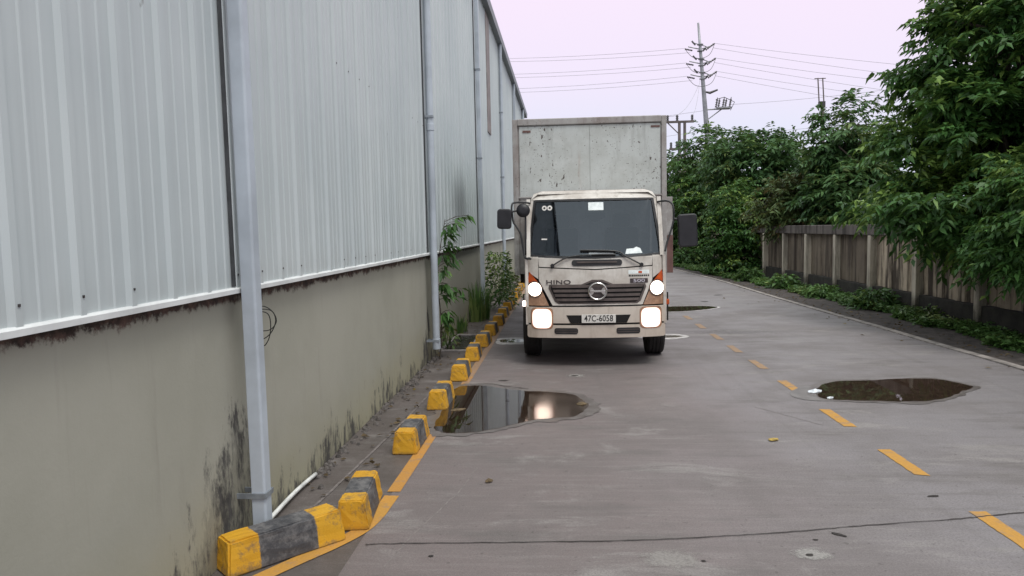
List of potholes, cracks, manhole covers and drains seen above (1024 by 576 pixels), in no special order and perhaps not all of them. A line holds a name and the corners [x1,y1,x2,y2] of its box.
pothole [427,383,601,437]
pothole [806,377,981,404]
